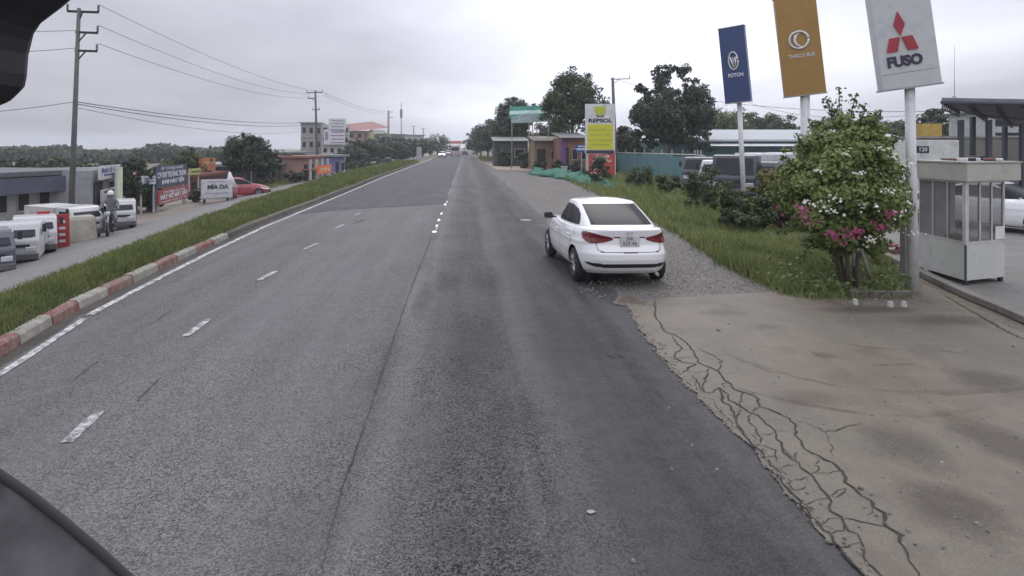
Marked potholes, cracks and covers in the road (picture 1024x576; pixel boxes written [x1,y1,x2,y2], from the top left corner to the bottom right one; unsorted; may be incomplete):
crack [653,301,920,576]
